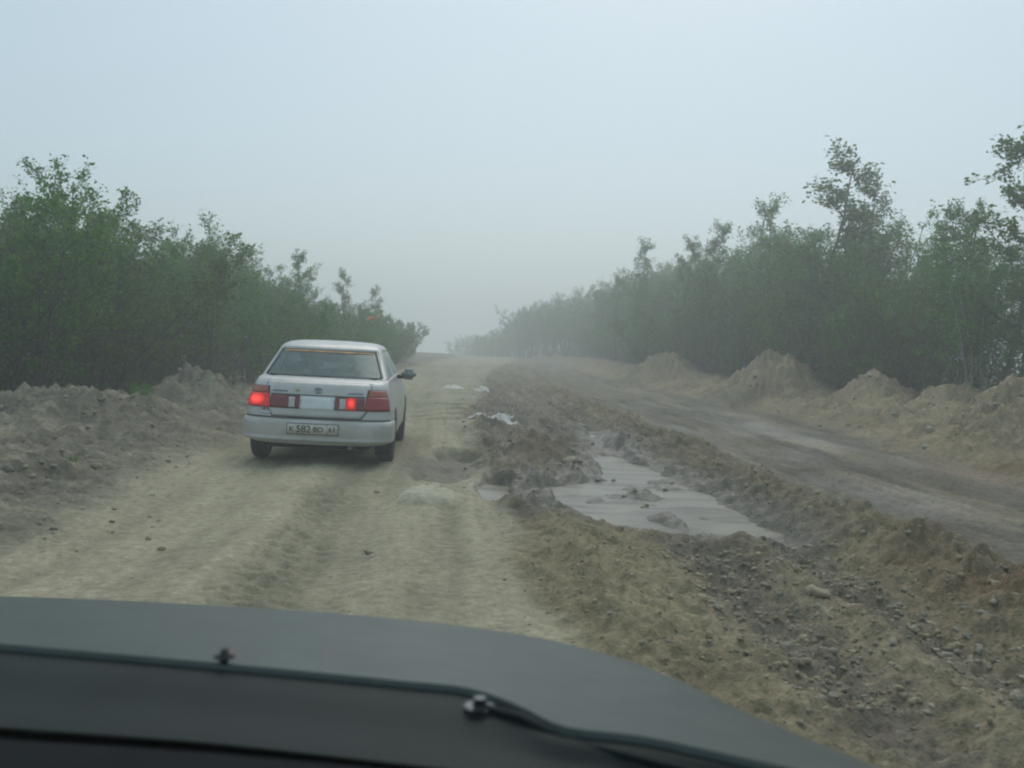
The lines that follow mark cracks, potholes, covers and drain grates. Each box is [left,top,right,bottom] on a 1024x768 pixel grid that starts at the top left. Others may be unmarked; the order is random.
pothole [394,446,498,485]
pothole [519,425,830,553]
